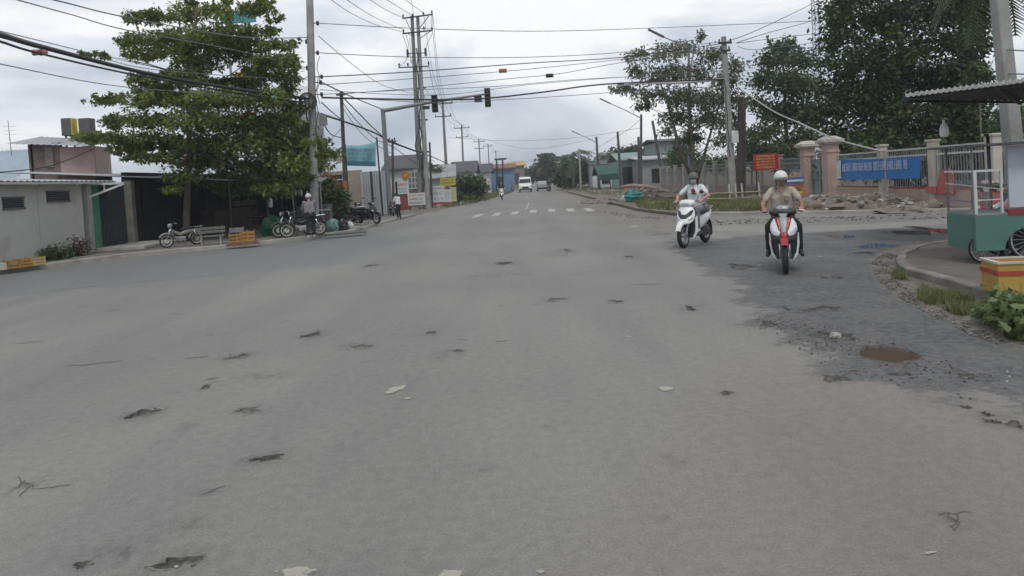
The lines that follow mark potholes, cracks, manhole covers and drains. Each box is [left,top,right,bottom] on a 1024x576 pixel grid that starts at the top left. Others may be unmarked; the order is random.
pothole [121,407,165,419]
pothole [72,560,94,571]
pothole [144,555,208,571]
crack [939,511,972,530]
pothole [244,454,286,462]
pothole [855,342,925,366]
crack [17,476,70,497]
